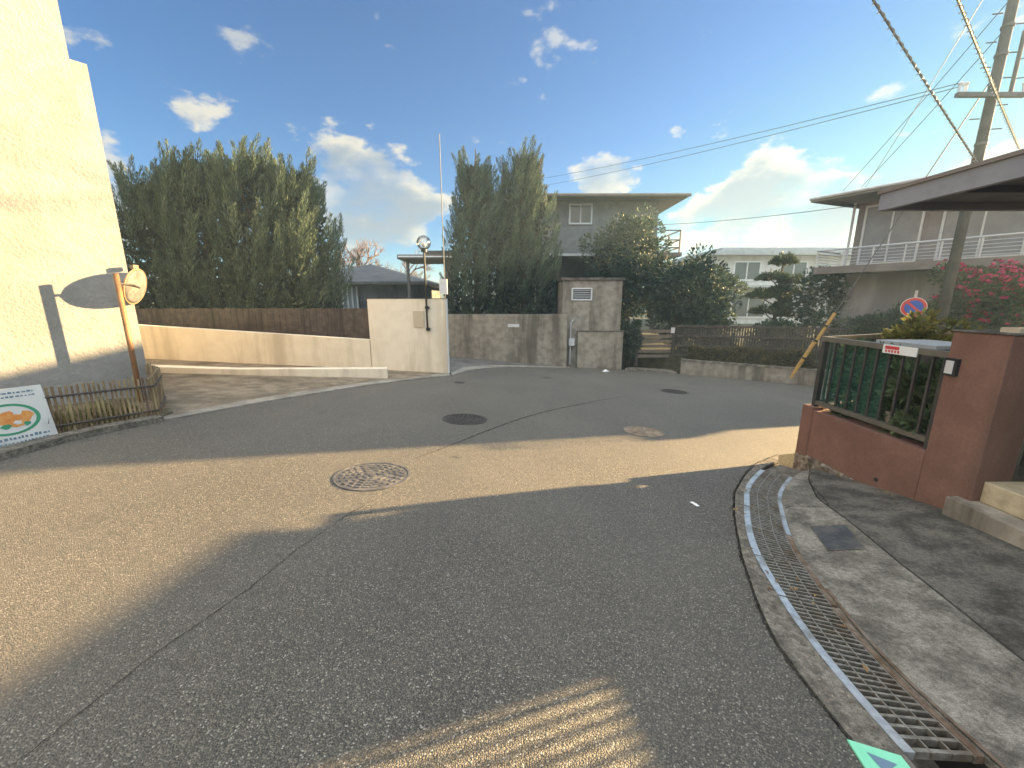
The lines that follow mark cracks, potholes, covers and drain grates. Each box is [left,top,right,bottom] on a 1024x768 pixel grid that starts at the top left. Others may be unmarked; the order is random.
drain grate [744,506,791,536]
utility cover [810,524,867,550]
drain grate [755,555,838,608]
drain grate [778,596,985,764]
drain grate [745,524,807,565]
manhole cover [333,462,411,491]
drain grate [745,469,792,500]
manhole cover [442,413,487,425]
manhole cover [624,426,664,437]
drain grate [744,490,785,516]
